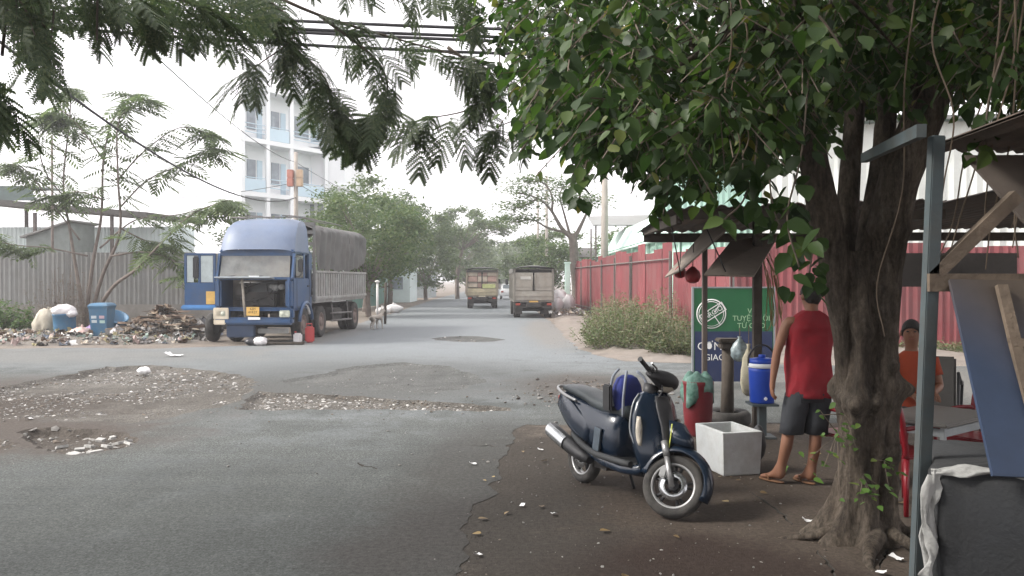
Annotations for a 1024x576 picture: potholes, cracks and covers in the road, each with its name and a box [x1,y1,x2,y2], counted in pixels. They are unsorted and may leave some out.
pothole [0,365,258,423]
pothole [16,426,139,455]
pothole [239,391,512,412]
